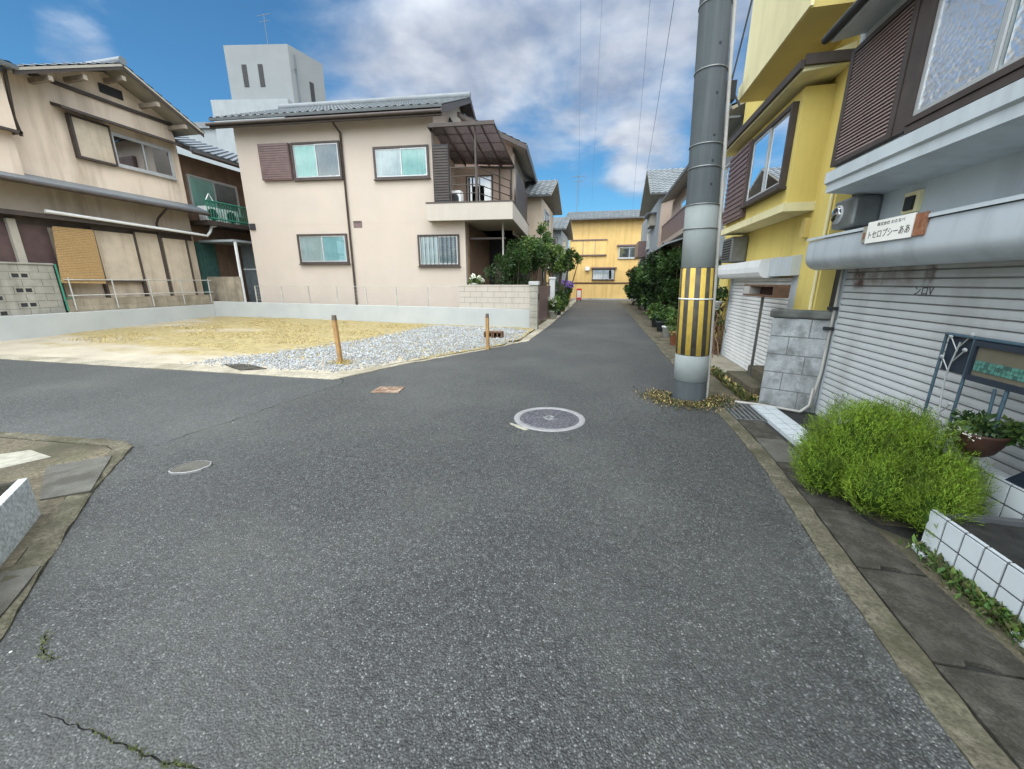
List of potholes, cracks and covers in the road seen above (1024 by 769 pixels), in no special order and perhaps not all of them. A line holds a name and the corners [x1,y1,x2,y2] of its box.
crack [42,714,201,769]
crack [30,631,61,662]
manhole cover [510,407,585,432]
drain grate [722,403,767,423]
manhole cover [168,460,212,475]
